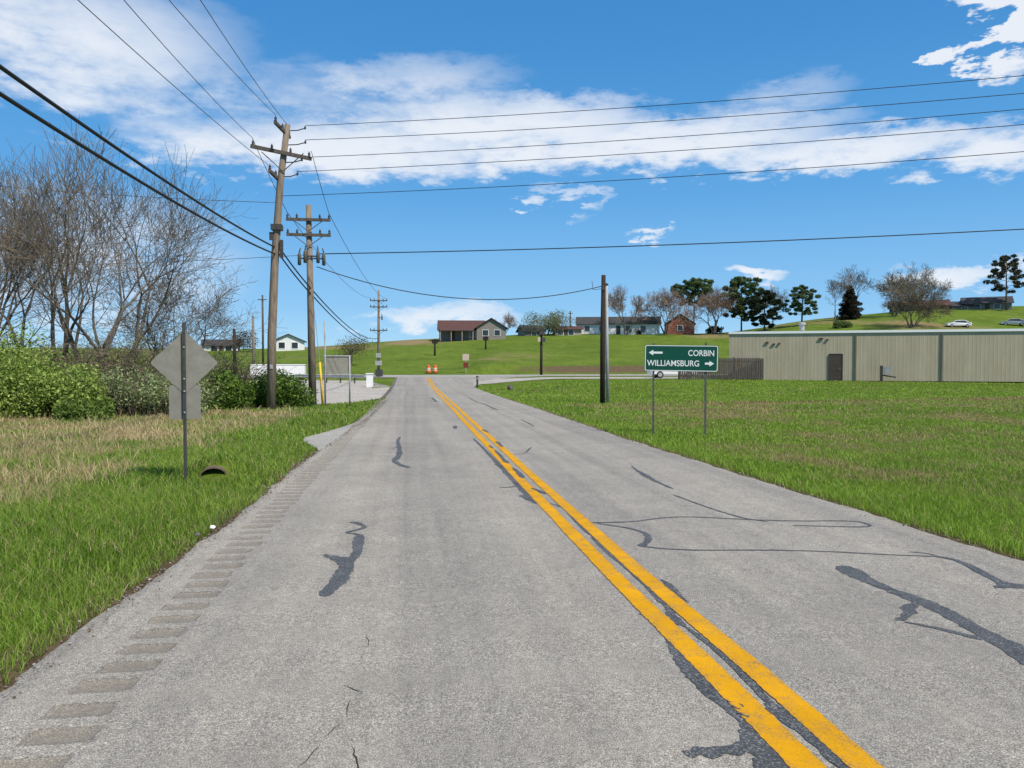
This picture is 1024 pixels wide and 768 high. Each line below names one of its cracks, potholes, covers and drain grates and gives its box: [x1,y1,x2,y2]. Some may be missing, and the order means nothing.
crack [297,685,363,768]
